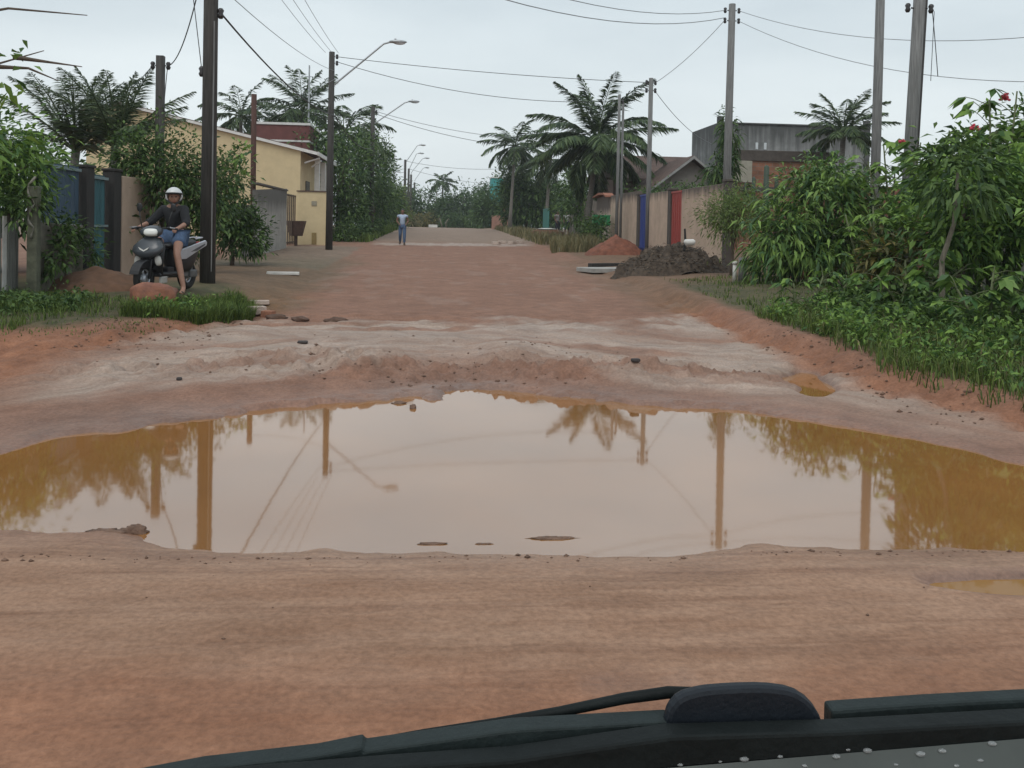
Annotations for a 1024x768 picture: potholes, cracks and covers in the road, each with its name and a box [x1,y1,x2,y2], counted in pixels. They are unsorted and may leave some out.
pothole [923,573,1024,596]
pothole [0,382,1024,562]
pothole [771,367,841,397]
